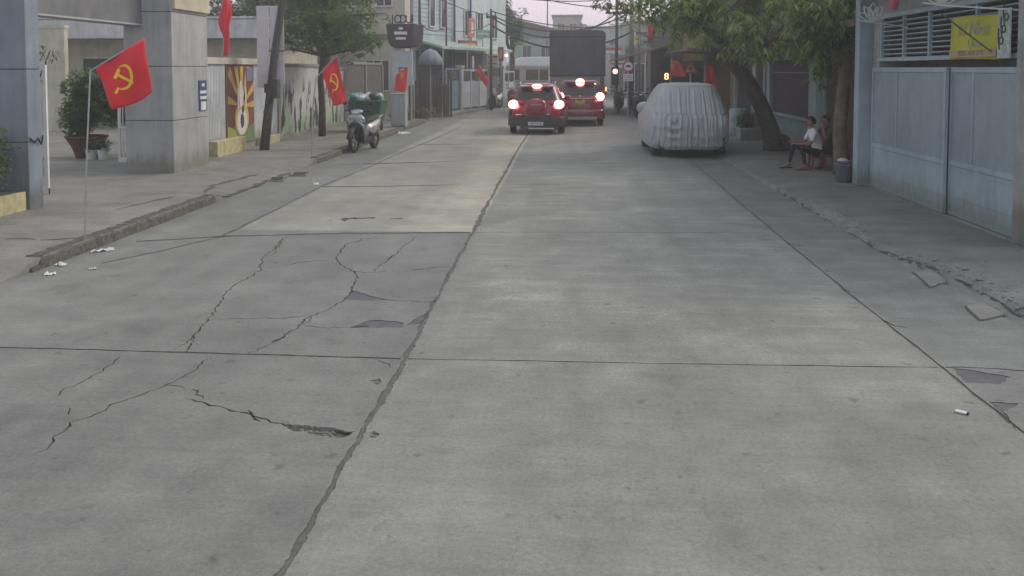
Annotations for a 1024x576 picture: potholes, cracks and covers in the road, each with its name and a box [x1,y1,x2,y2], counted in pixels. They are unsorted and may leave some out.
crack [28,238,452,457]
pothole [279,423,353,438]
